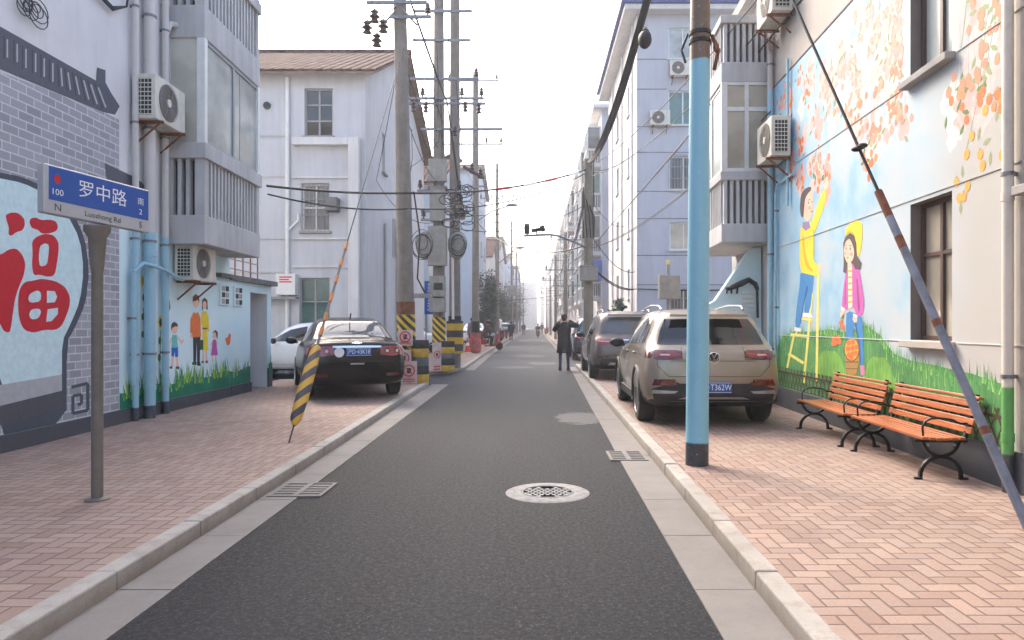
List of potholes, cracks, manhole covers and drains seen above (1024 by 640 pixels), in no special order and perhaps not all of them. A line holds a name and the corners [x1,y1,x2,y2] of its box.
manhole cover [506,483,589,503]
drain grate [266,482,338,498]
drain grate [605,451,649,461]
